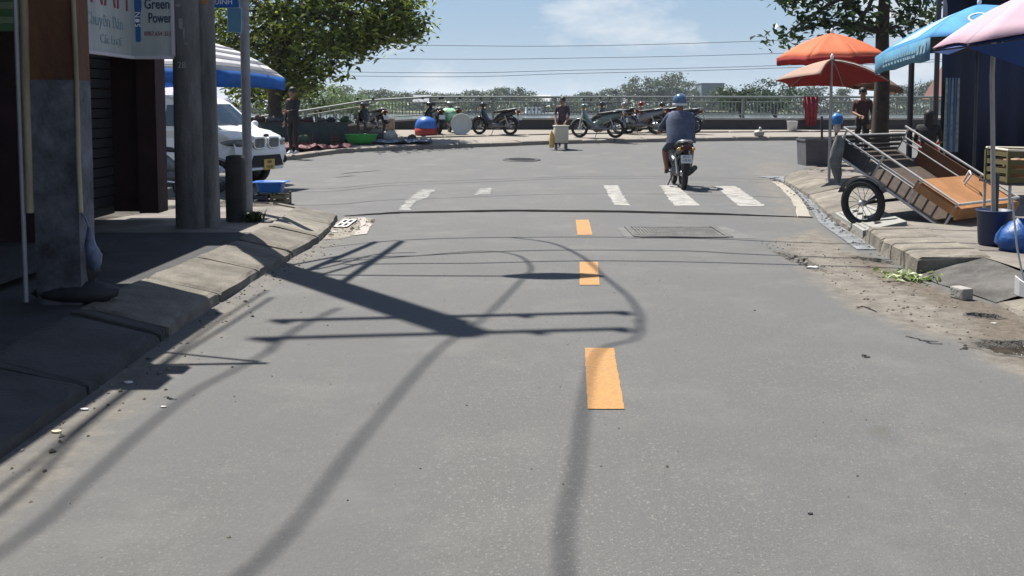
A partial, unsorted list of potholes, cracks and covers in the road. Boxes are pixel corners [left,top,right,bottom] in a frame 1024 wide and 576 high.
pothole [963,312,1008,320]
pothole [960,338,1024,358]
drain grate [333,219,357,228]
manhole cover [624,226,733,238]
